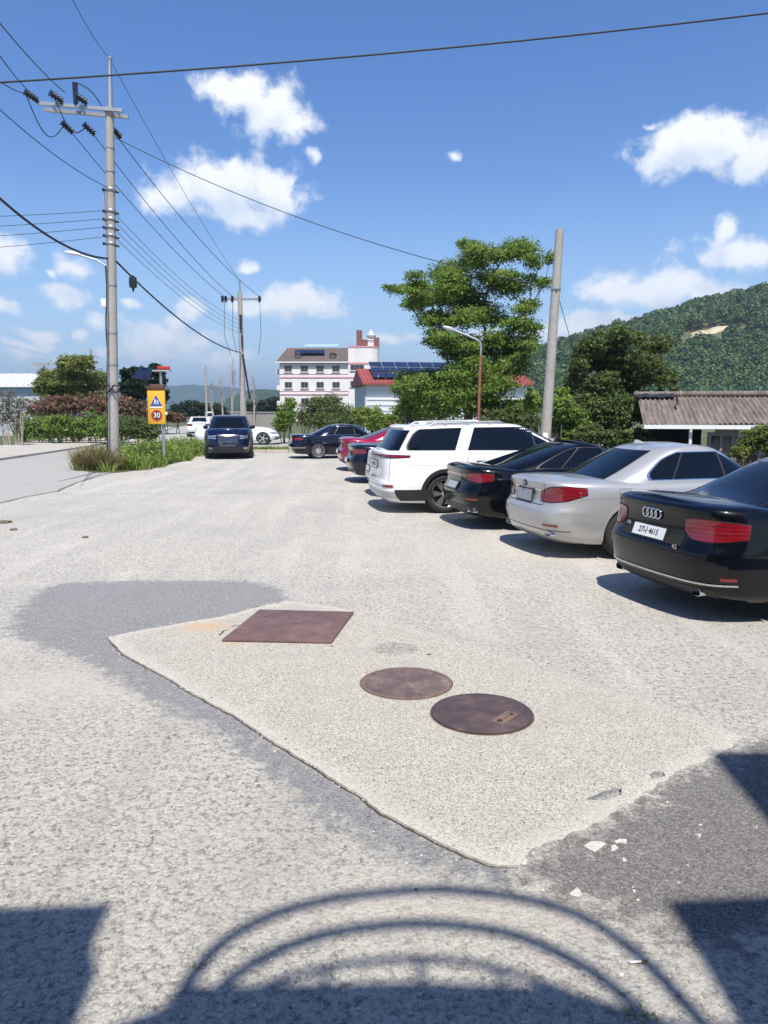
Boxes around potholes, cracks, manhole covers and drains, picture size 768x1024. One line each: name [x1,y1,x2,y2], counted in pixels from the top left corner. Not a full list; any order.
manhole cover [430,693,535,736]
manhole cover [359,667,453,700]
